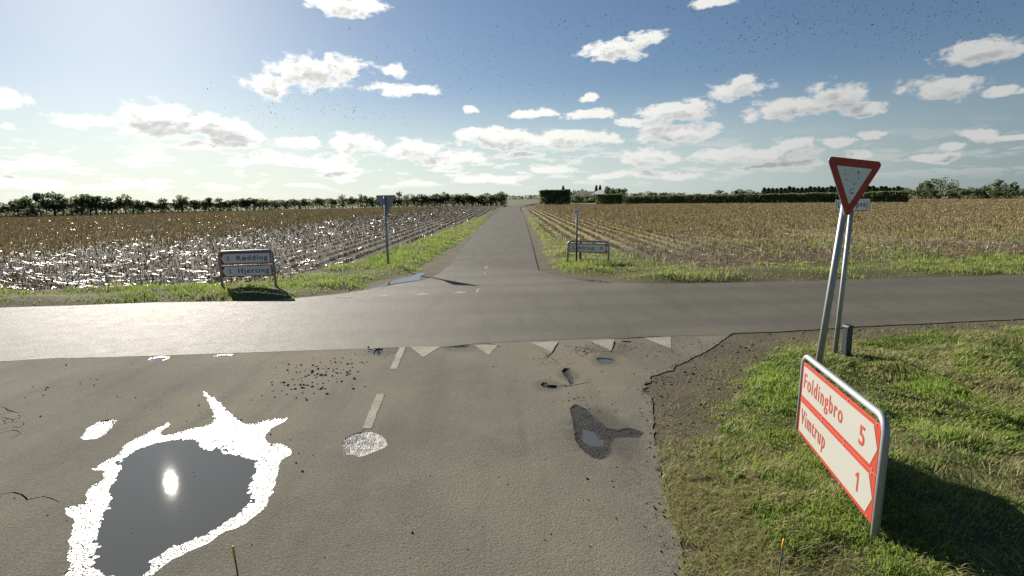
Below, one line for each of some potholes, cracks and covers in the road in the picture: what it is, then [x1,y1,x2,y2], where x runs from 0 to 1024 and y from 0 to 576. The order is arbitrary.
pothole [562,368,574,385]
pothole [570,404,644,460]
pothole [62,392,291,576]
